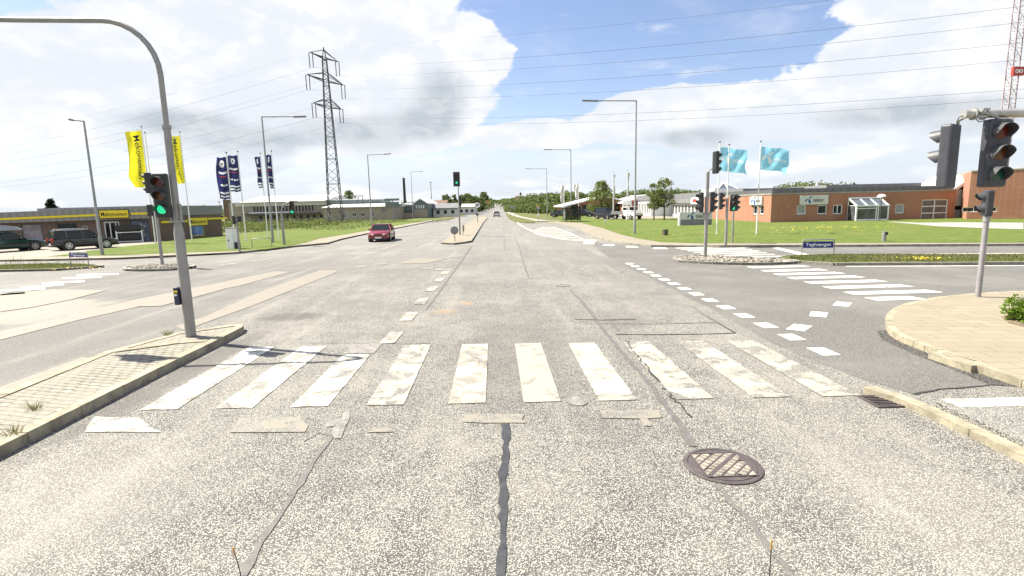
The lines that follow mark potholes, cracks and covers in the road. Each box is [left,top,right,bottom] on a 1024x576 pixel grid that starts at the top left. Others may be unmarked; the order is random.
manhole cover [683,448,764,485]
drain grate [857,395,905,408]
